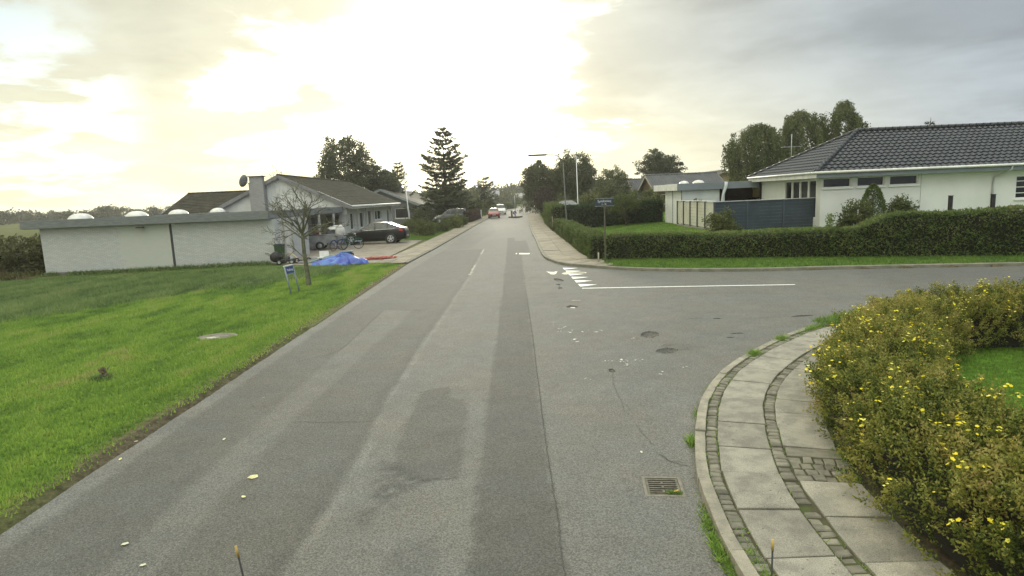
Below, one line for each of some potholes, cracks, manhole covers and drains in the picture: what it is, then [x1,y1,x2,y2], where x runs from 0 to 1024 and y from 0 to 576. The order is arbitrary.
drain grate [642,476,686,497]
